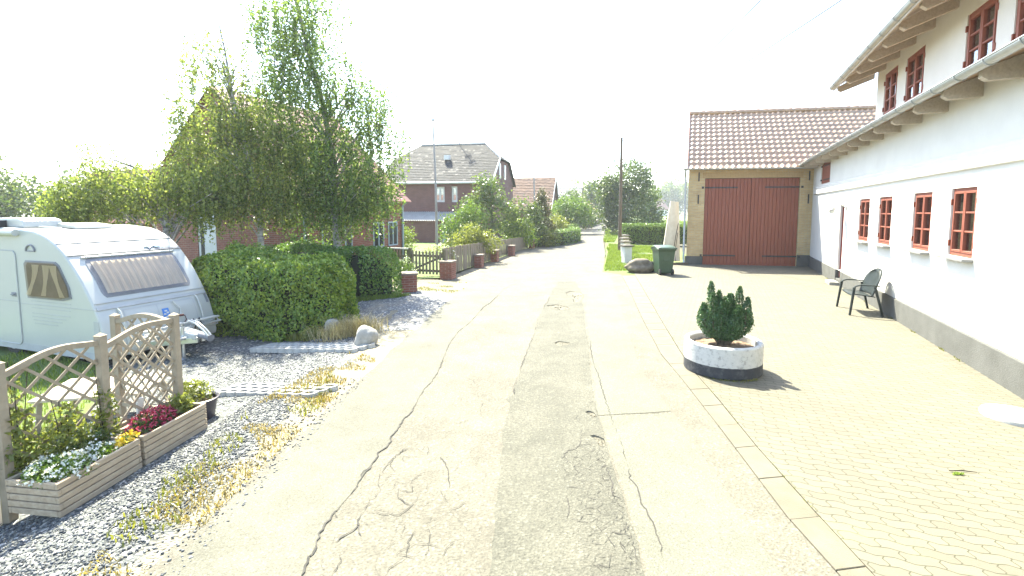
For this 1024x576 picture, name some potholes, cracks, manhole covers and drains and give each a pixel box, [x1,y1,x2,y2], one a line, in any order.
crack [301,295,498,575]
crack [562,341,663,572]
